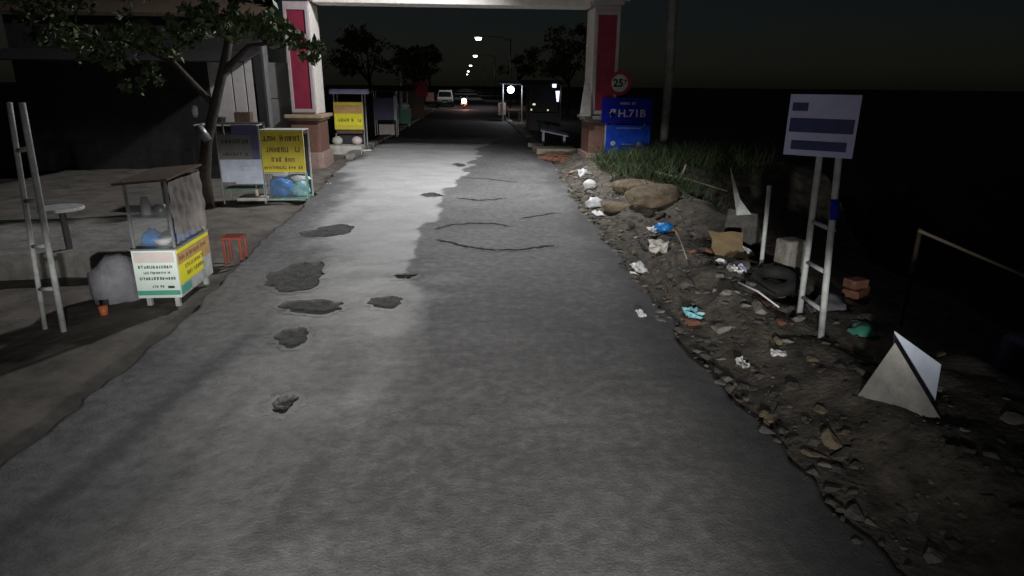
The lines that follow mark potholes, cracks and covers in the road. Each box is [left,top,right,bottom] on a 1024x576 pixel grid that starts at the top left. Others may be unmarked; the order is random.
pothole [263,323,319,351]
pothole [294,223,359,239]
pothole [386,270,424,281]
pothole [257,388,310,420]
pothole [360,293,409,311]
crack [430,177,563,252]
pothole [255,260,332,295]
pothole [270,296,352,317]
